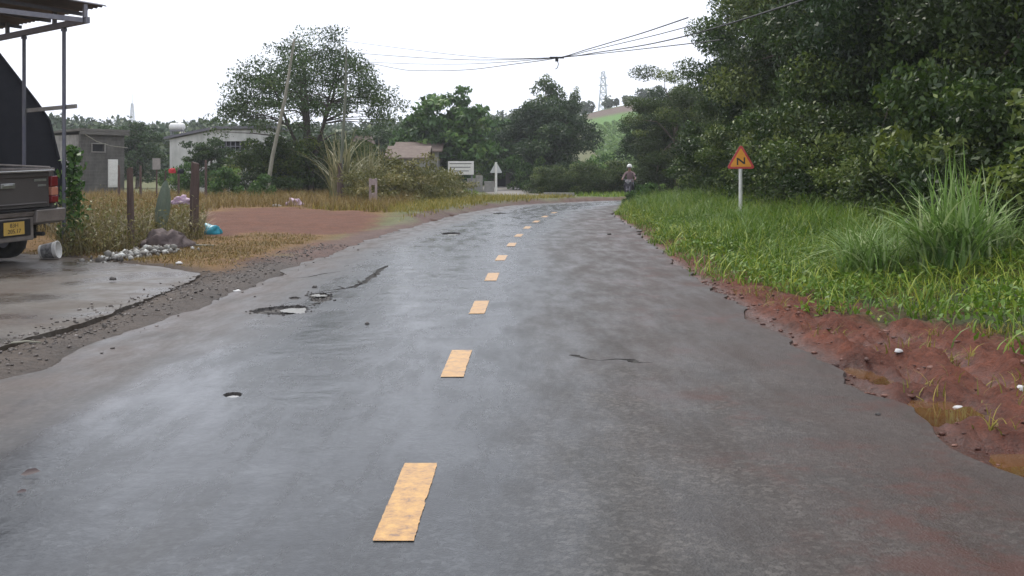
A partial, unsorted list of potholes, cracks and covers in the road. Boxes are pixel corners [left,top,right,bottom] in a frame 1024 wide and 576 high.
pothole [245,304,315,315]
crack [570,355,653,363]
crack [302,266,388,306]
pothole [305,291,336,304]
